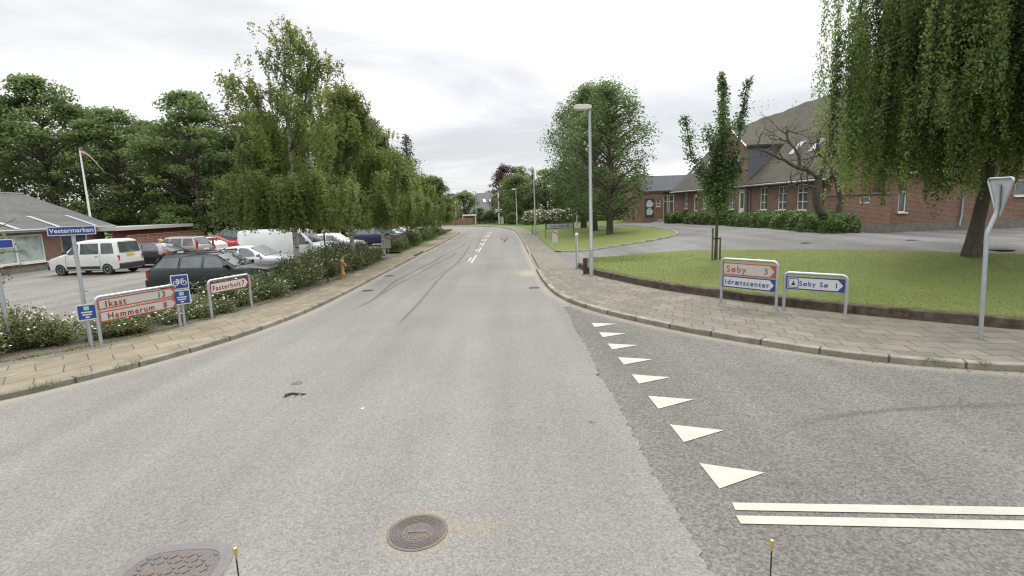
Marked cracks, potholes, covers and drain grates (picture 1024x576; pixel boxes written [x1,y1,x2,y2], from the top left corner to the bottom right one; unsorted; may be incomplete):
manhole cover [112,542,234,576]
manhole cover [386,514,448,552]
